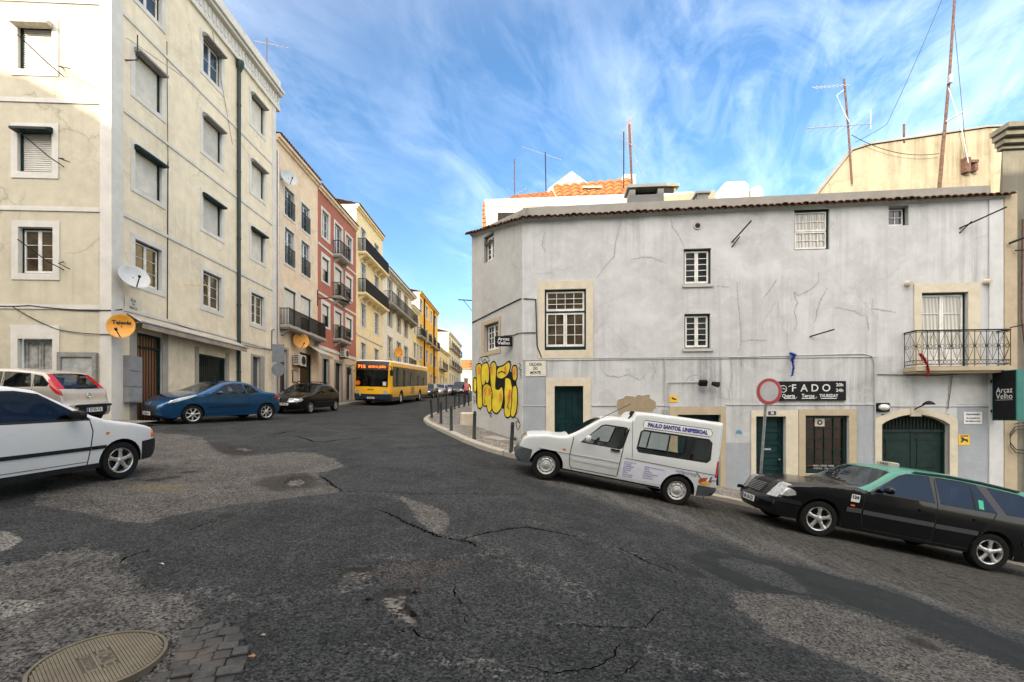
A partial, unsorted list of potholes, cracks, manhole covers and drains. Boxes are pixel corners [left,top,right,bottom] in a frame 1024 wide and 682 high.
pothole [364,586,431,633]
crack [119,550,151,564]
crack [377,510,575,547]
manhole cover [22,630,168,682]
crack [267,431,358,443]
crack [528,607,670,678]
crack [317,476,343,491]
pothole [326,563,386,588]
